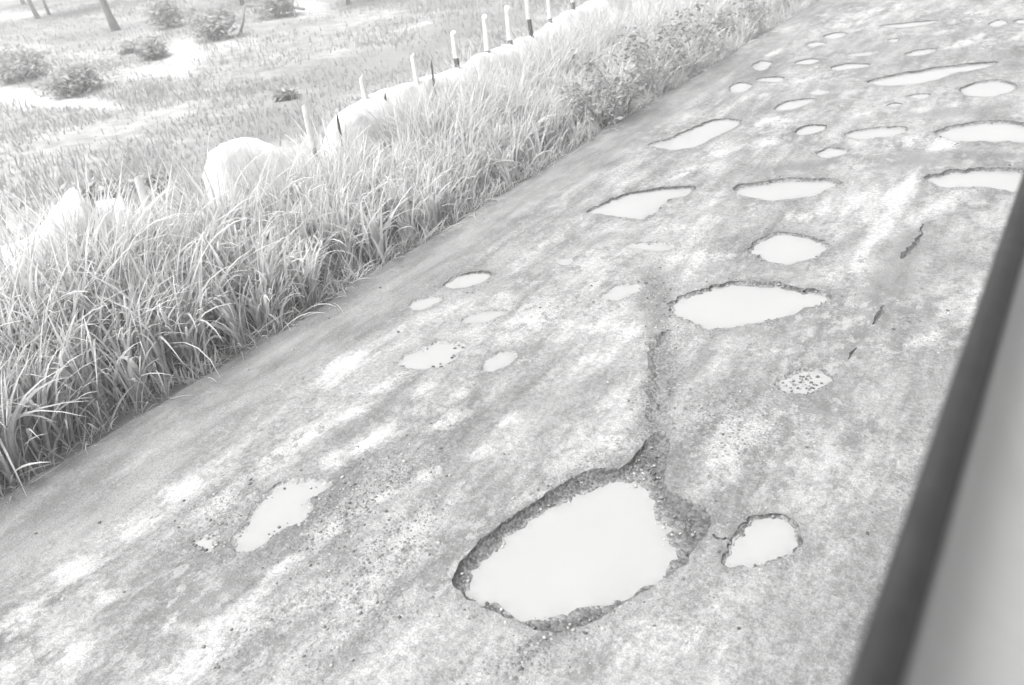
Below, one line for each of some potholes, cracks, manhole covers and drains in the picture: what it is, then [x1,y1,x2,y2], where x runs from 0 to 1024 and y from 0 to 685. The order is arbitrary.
pothole [452,431,712,633]
pothole [721,513,803,569]
crack [848,224,924,359]
pothole [393,340,468,370]
pothole [733,177,843,201]
pothole [230,477,333,553]
pothole [923,167,1024,192]
pothole [867,61,998,86]
pothole [648,118,742,150]
pothole [959,79,1017,97]
pothole [667,281,832,329]
pothole [935,120,1024,142]
